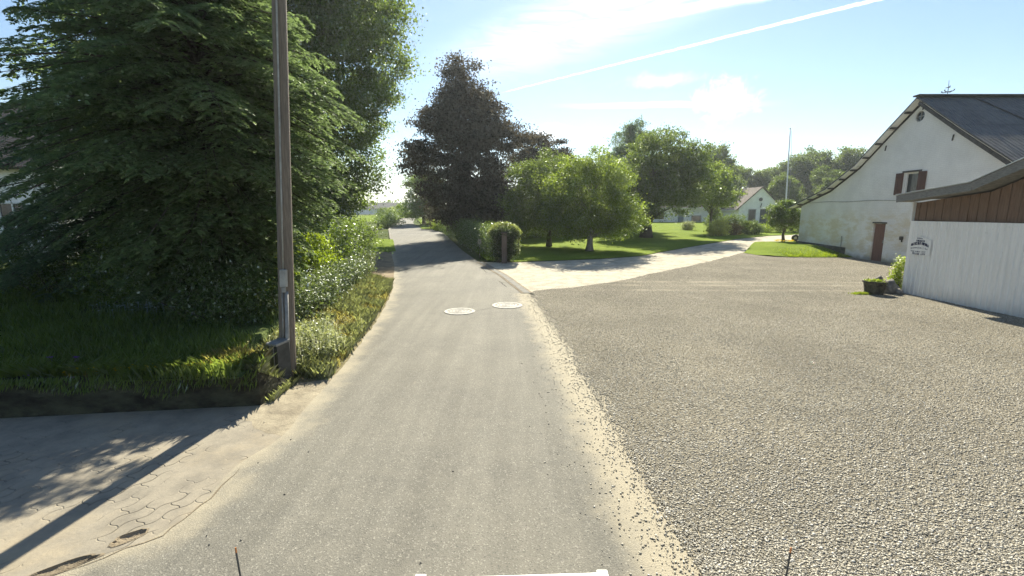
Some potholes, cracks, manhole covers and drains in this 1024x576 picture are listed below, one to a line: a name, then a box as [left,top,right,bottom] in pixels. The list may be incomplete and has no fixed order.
pothole [108,528,149,548]
pothole [29,553,105,576]
